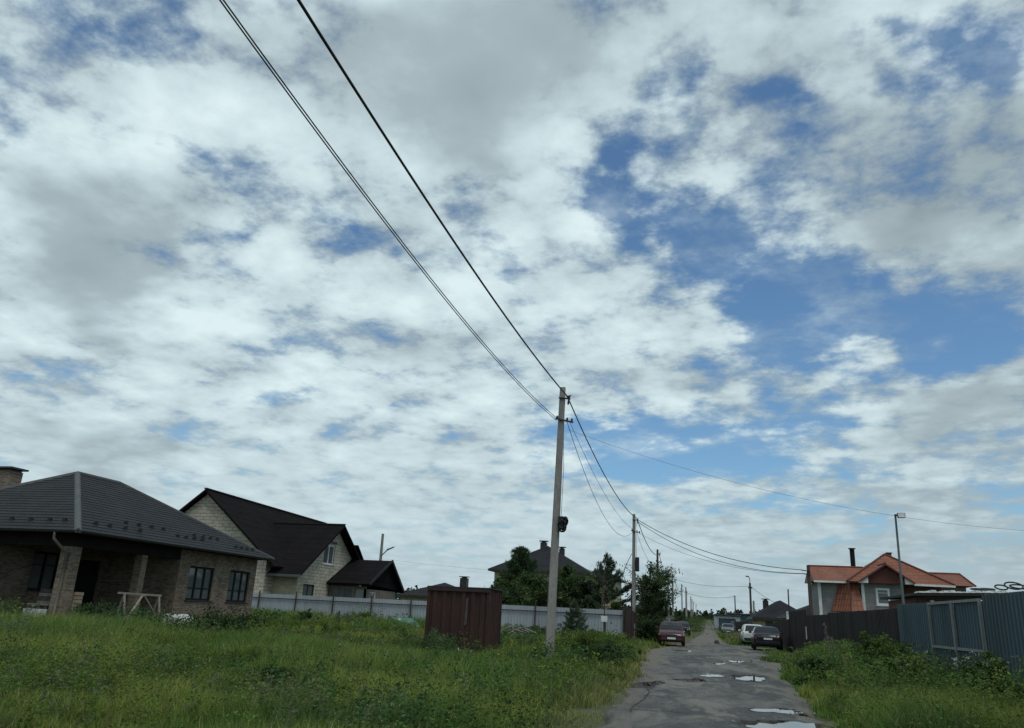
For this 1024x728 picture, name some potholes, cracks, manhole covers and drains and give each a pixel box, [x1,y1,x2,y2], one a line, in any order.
pothole [743,707,816,716]
pothole [730,717,835,728]
pothole [629,680,666,689]
pothole [729,673,770,682]
